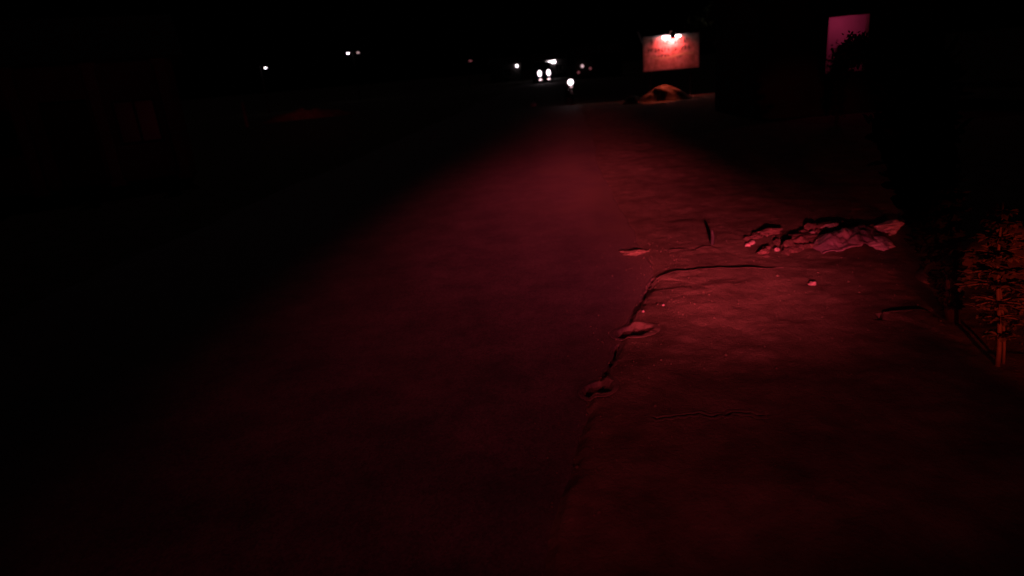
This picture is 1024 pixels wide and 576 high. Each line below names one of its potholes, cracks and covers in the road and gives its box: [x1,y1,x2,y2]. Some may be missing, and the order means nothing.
crack [872,309,933,320]
crack [647,409,768,422]
crack [600,343,624,376]
crack [625,245,784,325]
